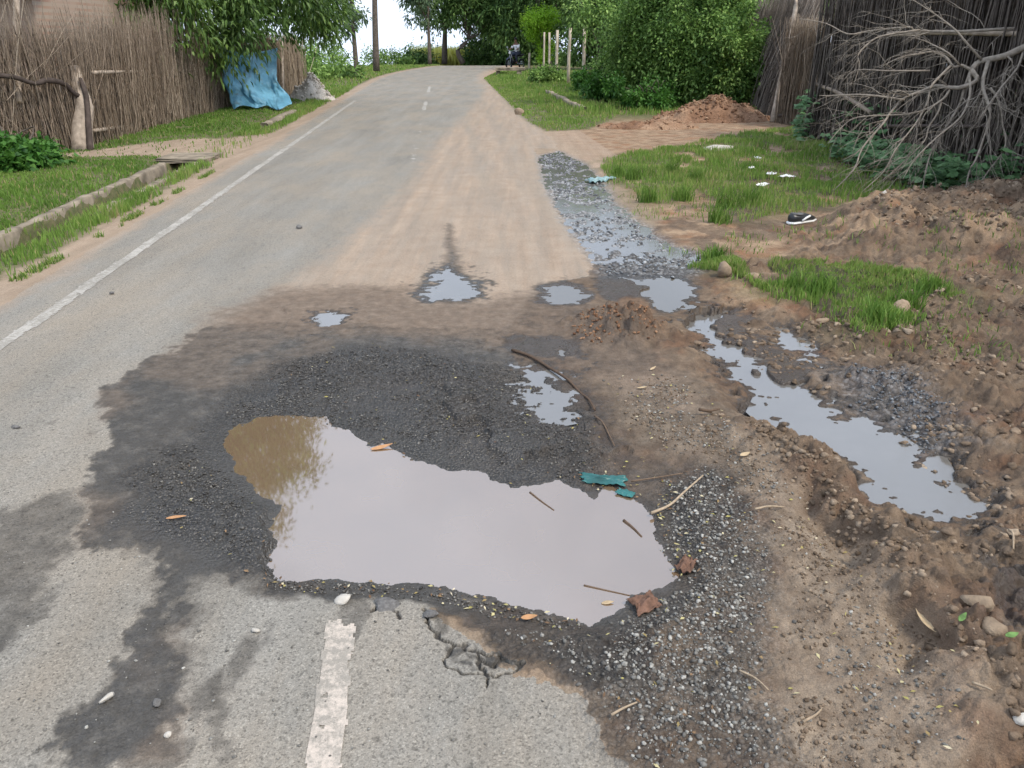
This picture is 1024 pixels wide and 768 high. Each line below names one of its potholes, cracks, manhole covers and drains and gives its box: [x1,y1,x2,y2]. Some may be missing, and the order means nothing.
crack [368,606,526,688]
pothole [168,358,704,639]
pothole [416,264,483,302]
